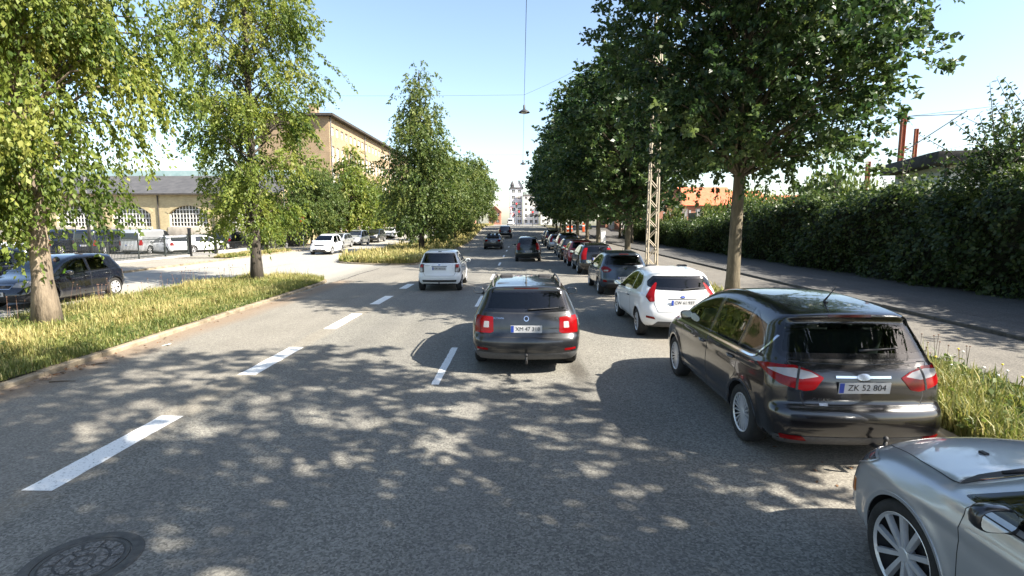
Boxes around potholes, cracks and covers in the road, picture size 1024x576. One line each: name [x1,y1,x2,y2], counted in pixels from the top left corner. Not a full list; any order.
manhole cover [15,531,146,576]
